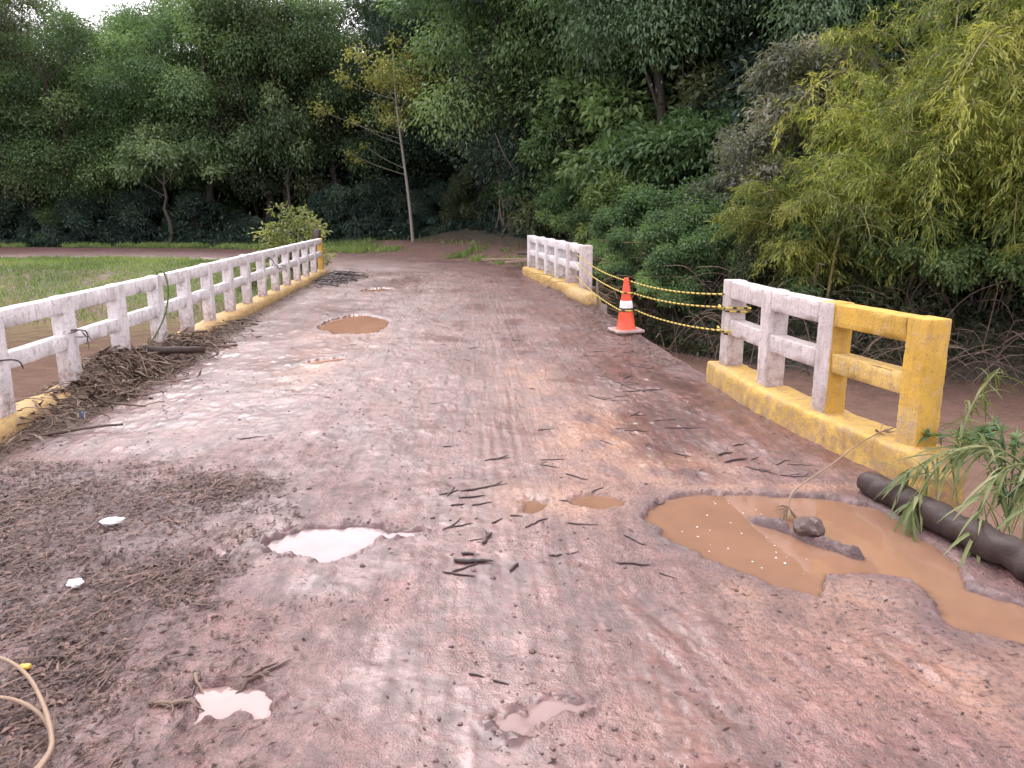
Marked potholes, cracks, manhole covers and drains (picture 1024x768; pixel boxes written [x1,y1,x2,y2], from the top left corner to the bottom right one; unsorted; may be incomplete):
pothole [170,673,290,729]
pothole [482,692,598,740]
pothole [312,312,396,335]
pothole [509,492,559,518]
pothole [557,487,634,512]
pothole [298,355,356,365]
pothole [631,485,1024,651]
pothole [251,518,434,563]
